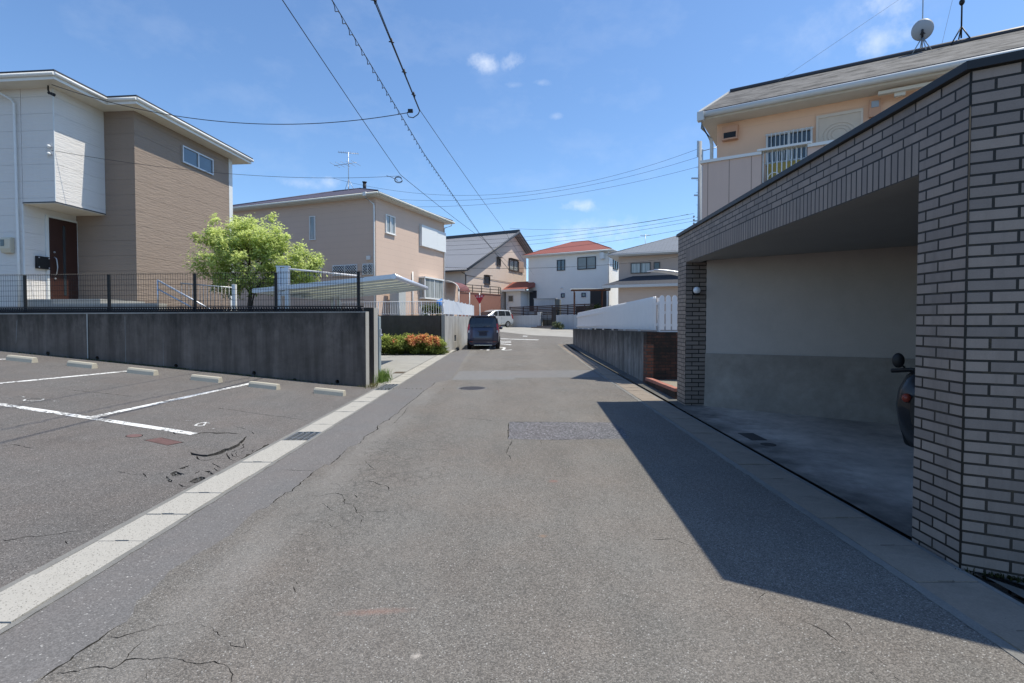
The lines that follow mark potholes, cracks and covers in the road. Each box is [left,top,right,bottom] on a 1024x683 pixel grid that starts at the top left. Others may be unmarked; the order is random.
crack [758,592,901,682]
crack [50,623,247,683]
crack [294,449,389,591]
drain grate [284,432,321,441]
crack [177,428,269,487]
